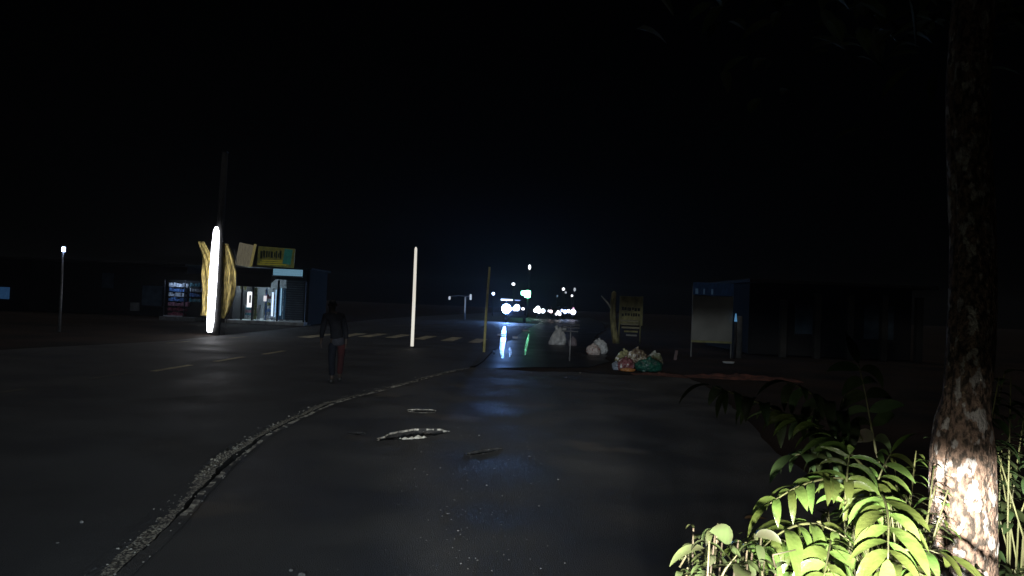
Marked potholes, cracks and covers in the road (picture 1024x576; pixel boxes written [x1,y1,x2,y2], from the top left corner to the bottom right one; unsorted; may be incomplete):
pothole [463,448,503,456]
pothole [375,428,452,441]
